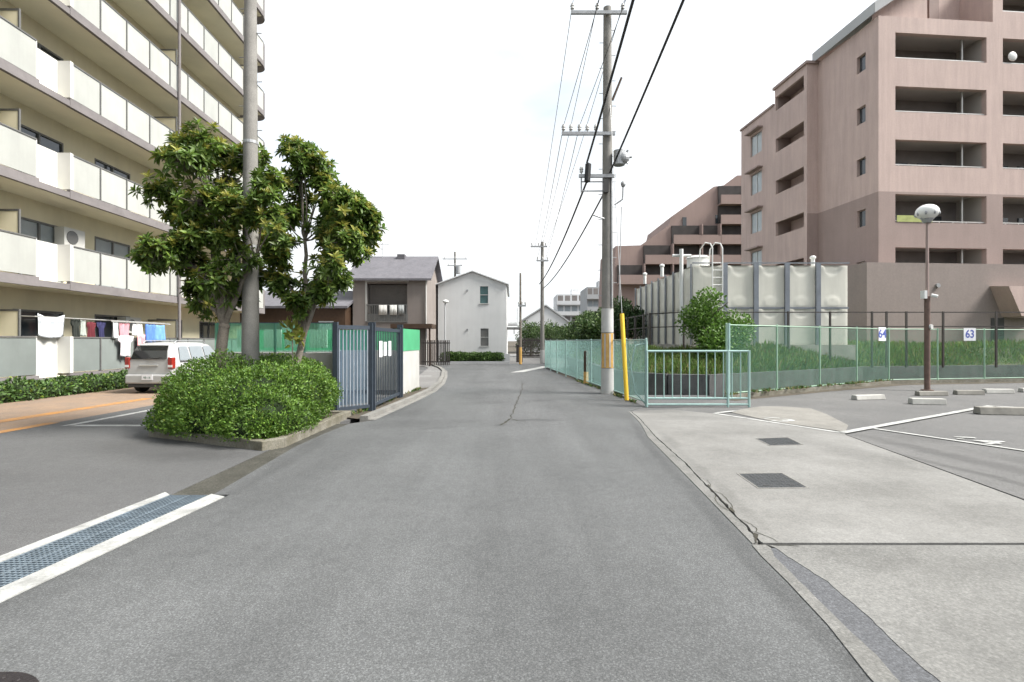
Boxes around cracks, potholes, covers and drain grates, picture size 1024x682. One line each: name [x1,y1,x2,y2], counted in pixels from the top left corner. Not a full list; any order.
manhole cover [736,472,809,489]
crack [500,383,523,425]
crack [707,480,795,546]
manhole cover [755,437,803,446]
